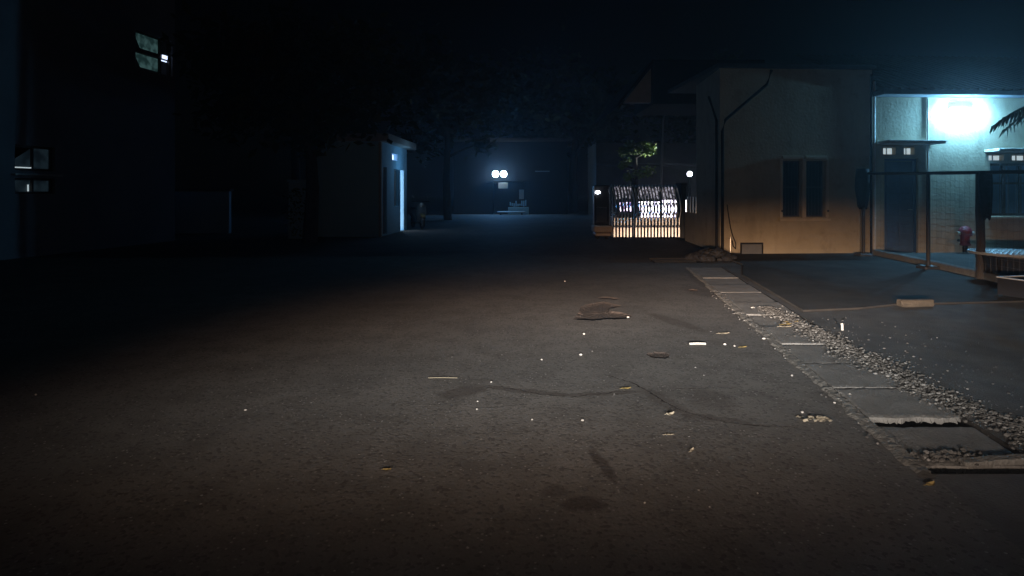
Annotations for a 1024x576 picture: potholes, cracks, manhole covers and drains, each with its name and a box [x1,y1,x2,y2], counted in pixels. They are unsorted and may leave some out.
crack [493,373,799,428]
